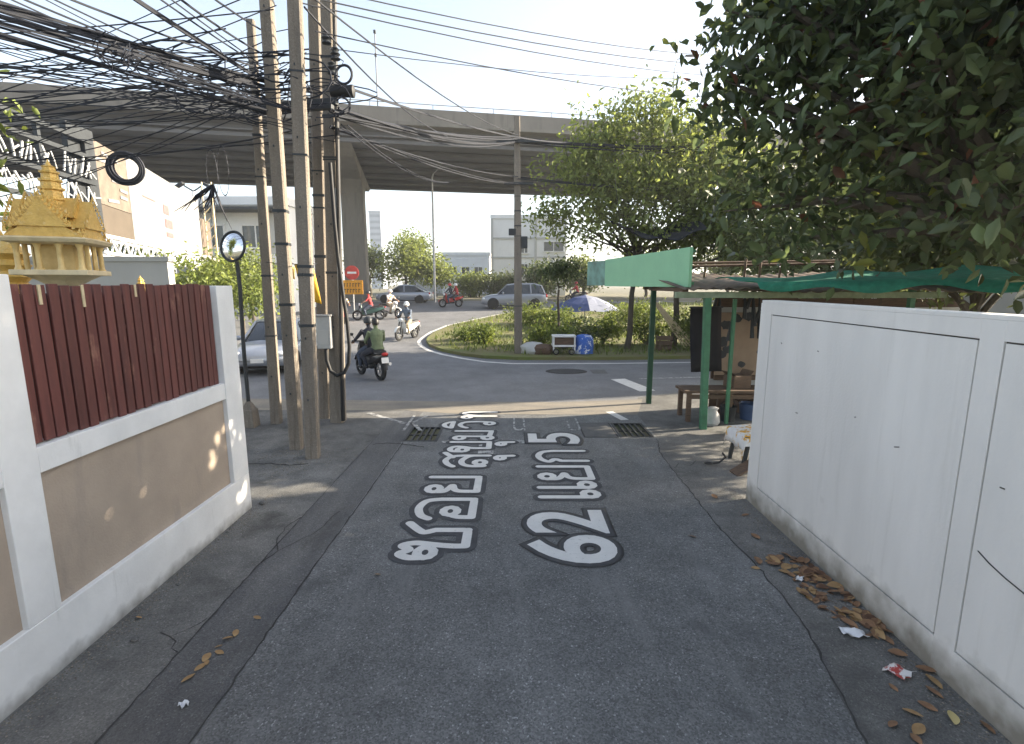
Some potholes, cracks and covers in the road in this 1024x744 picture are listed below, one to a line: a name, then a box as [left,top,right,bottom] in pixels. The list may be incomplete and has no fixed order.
drain grate [403,427,443,441]
crack [261,511,340,563]
drain grate [611,423,654,437]
crack [160,618,207,652]
